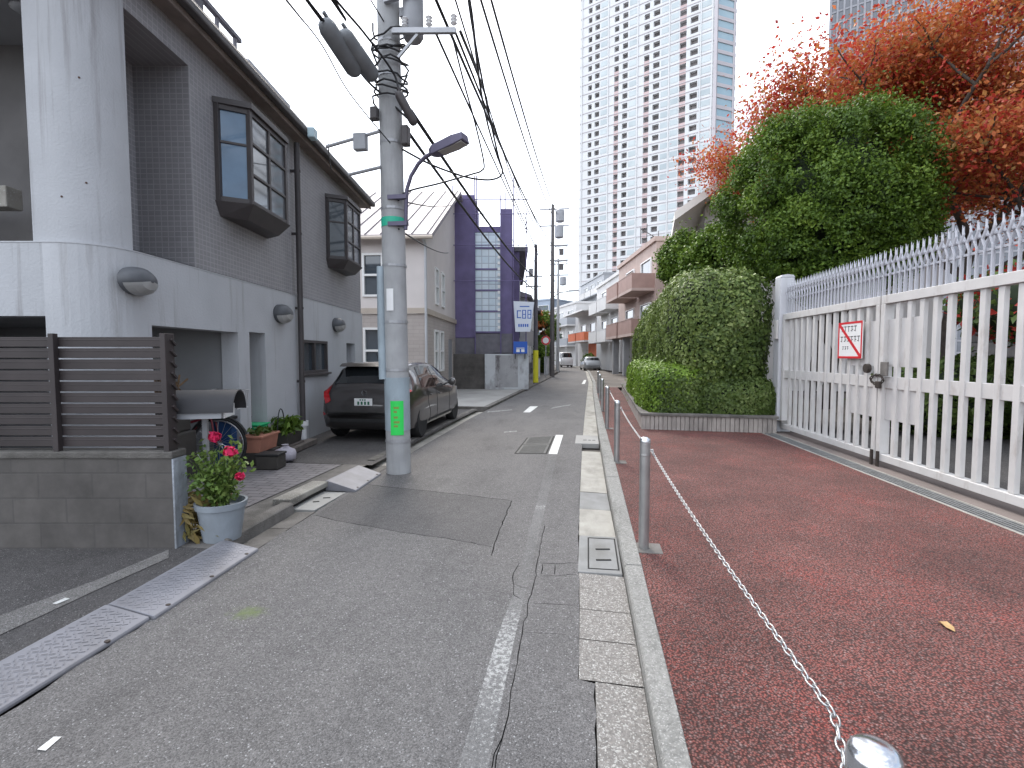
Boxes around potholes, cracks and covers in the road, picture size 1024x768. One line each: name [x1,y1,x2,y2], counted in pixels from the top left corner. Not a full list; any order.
crack [492,526,577,768]
